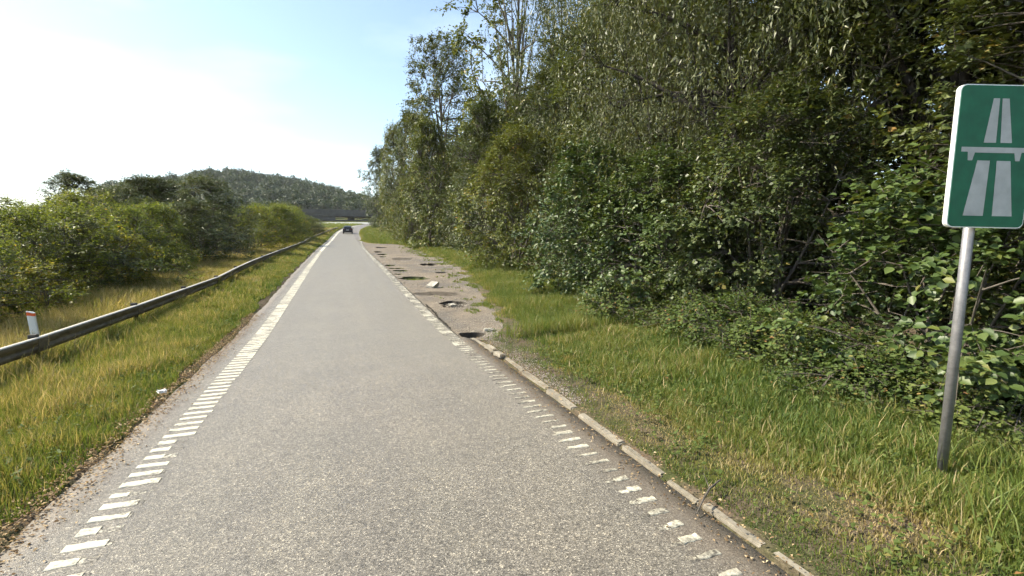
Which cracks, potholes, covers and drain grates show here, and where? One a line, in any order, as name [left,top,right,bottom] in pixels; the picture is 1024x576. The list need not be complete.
pothole [459,332,486,342]
